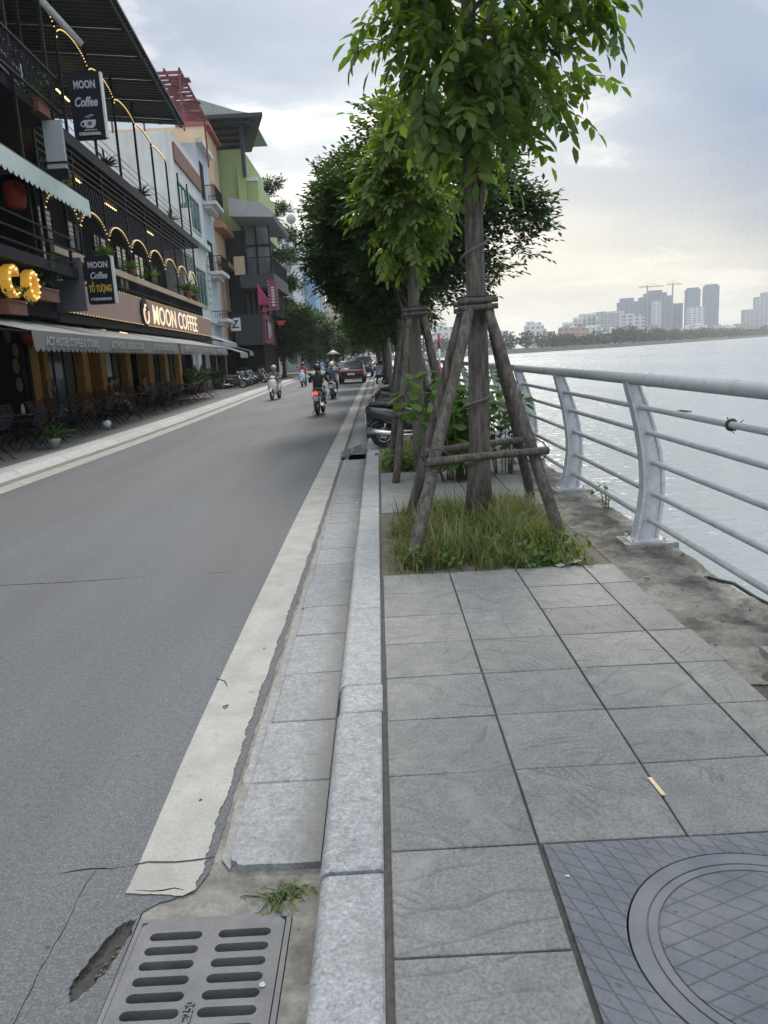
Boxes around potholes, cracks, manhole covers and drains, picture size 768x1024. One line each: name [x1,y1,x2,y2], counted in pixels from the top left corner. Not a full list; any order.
pothole [68,920,136,1003]
crack [59,857,214,874]
manhole cover [543,833,768,1024]
drain grate [341,444,365,458]
drain grate [96,912,293,1024]
crack [0,577,136,586]
